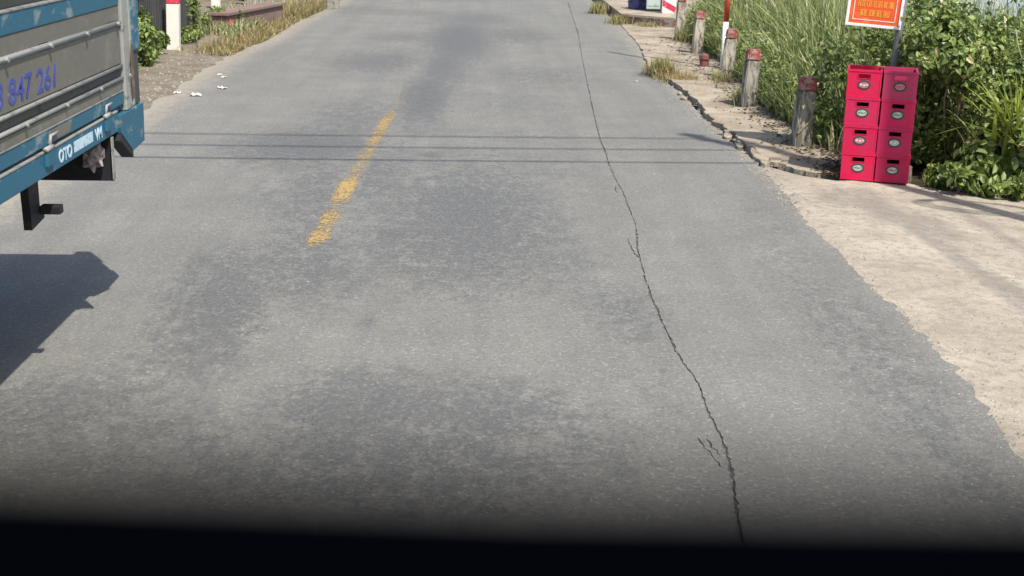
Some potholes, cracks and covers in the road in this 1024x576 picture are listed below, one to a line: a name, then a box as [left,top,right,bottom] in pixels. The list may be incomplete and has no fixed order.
crack [568,3,734,473]
